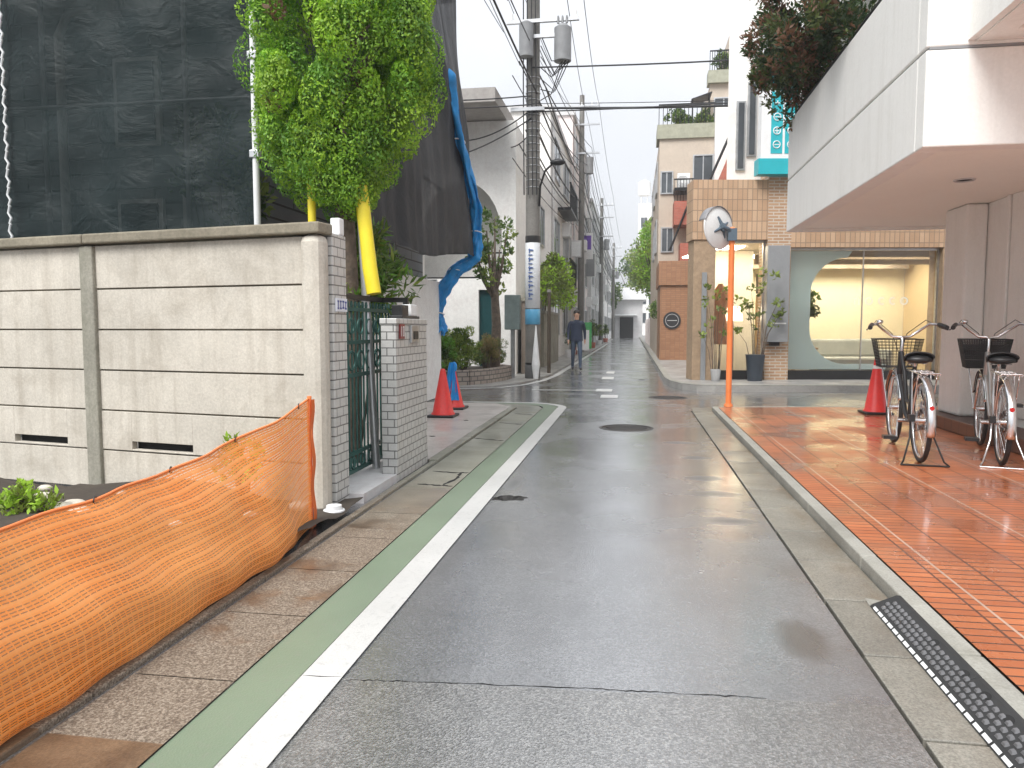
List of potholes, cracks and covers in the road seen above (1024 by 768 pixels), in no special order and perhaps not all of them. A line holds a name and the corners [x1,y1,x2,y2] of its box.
crack [419,471,469,487]
crack [305,675,766,699]
manhole cover [599,424,654,432]
